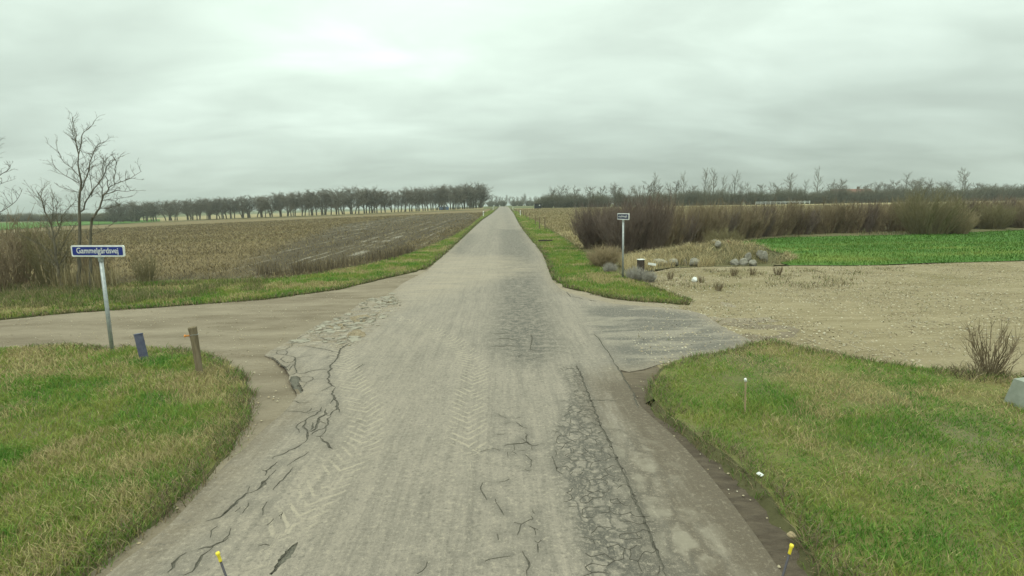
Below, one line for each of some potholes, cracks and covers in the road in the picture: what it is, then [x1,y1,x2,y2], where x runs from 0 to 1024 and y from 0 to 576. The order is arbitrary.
pothole [289,376,303,393]
crack [167,333,363,575]
crack [480,365,666,576]
